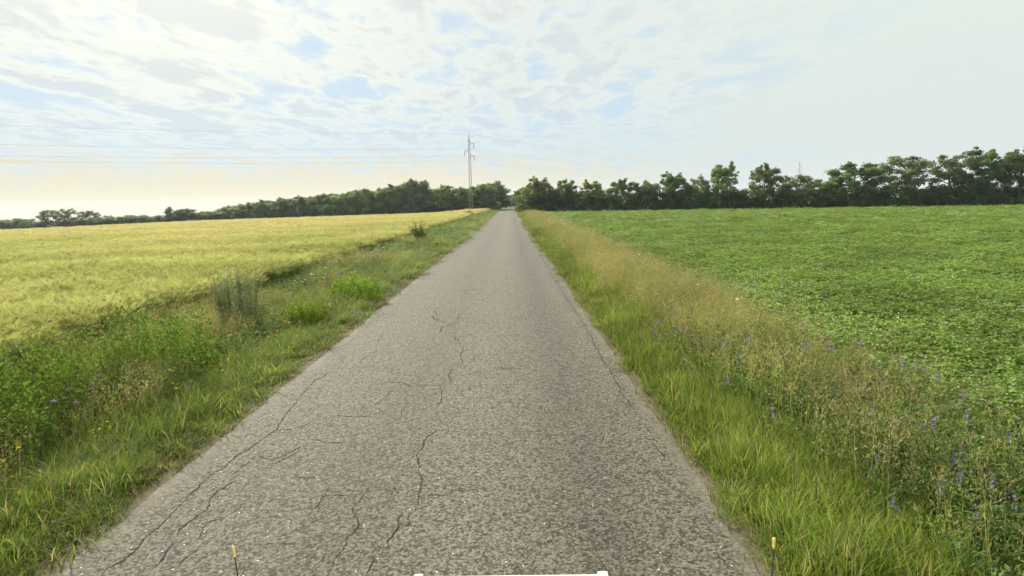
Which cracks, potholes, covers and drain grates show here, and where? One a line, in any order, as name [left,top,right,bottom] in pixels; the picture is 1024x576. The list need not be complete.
crack [102,308,464,573]
